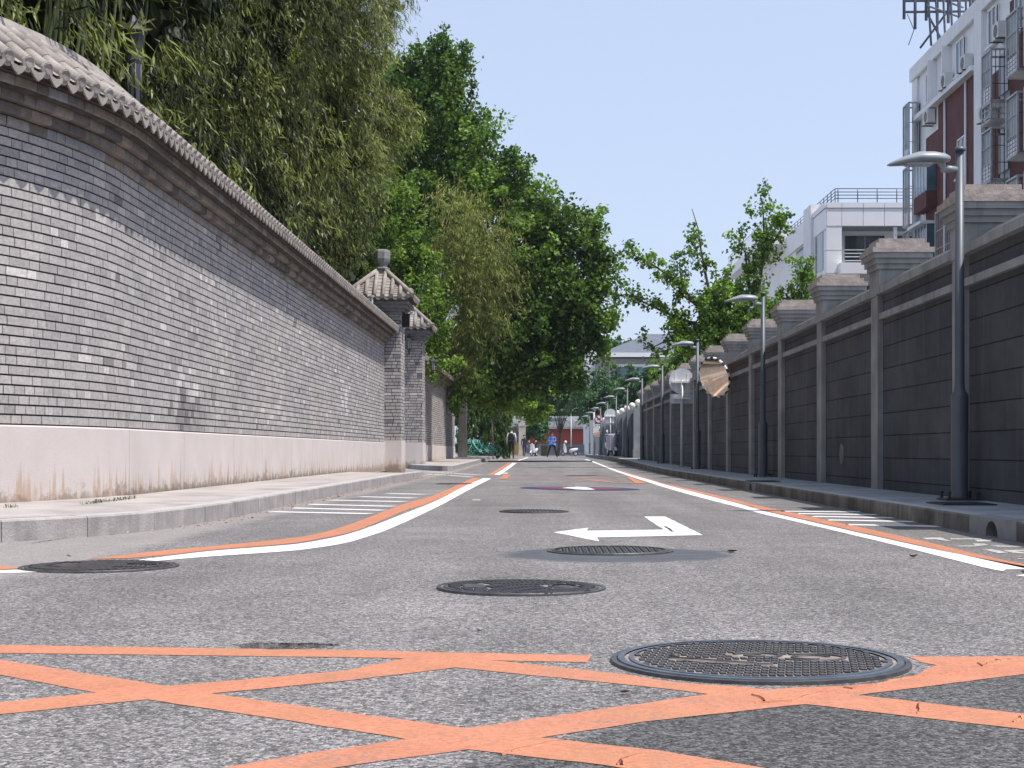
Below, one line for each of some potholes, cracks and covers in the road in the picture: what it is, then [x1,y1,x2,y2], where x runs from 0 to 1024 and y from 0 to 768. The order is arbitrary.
manhole cover [436,579,606,597]
manhole cover [18,560,179,573]
manhole cover [547,546,673,556]
manhole cover [610,639,912,686]
